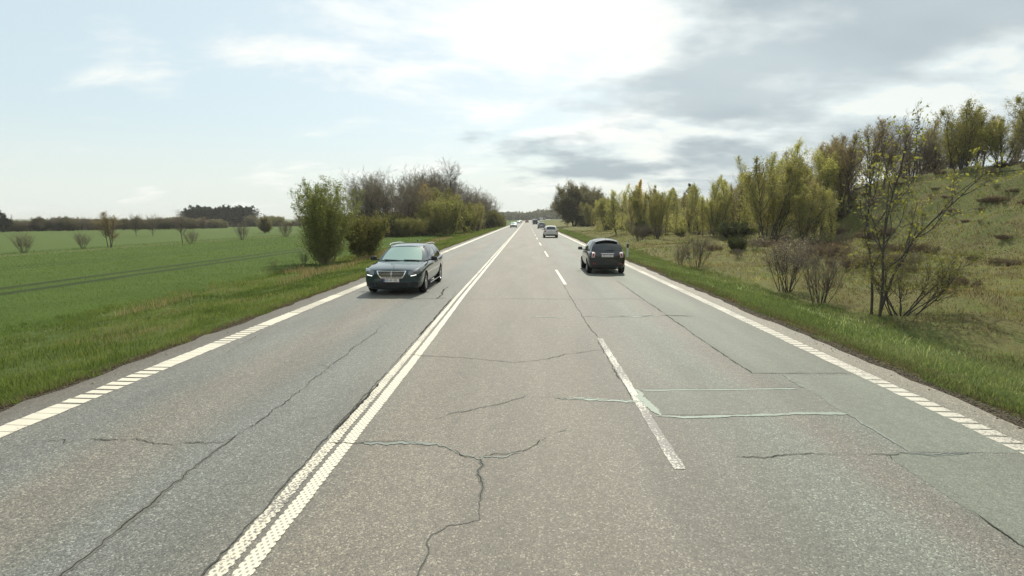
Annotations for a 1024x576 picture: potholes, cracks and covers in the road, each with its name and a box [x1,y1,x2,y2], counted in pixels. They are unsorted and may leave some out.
crack [329,429,566,576]
crack [50,330,377,576]
crack [442,397,643,417]
